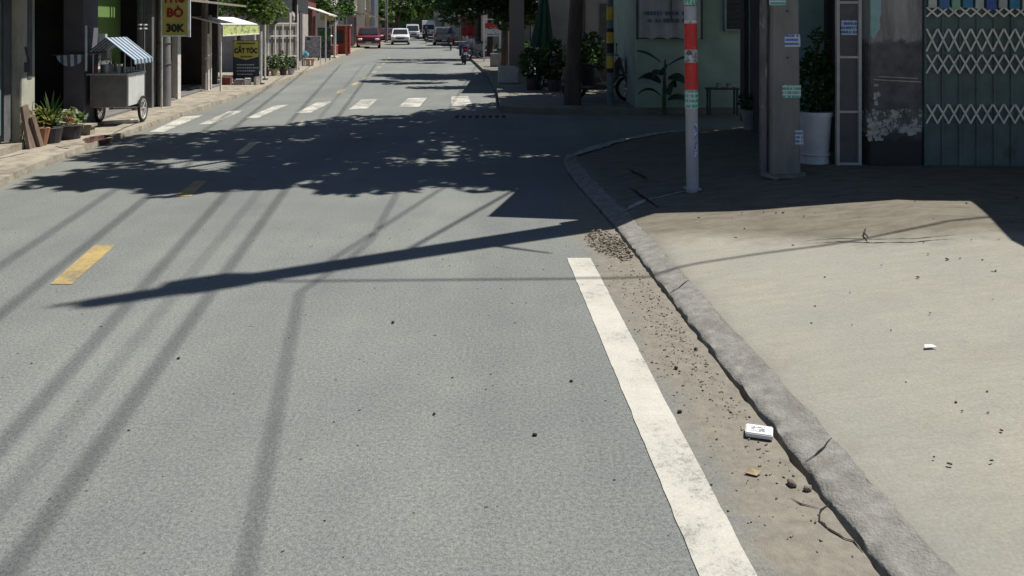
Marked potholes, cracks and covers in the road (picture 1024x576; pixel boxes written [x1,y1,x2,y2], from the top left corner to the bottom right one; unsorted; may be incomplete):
crack [790,497,863,551]
